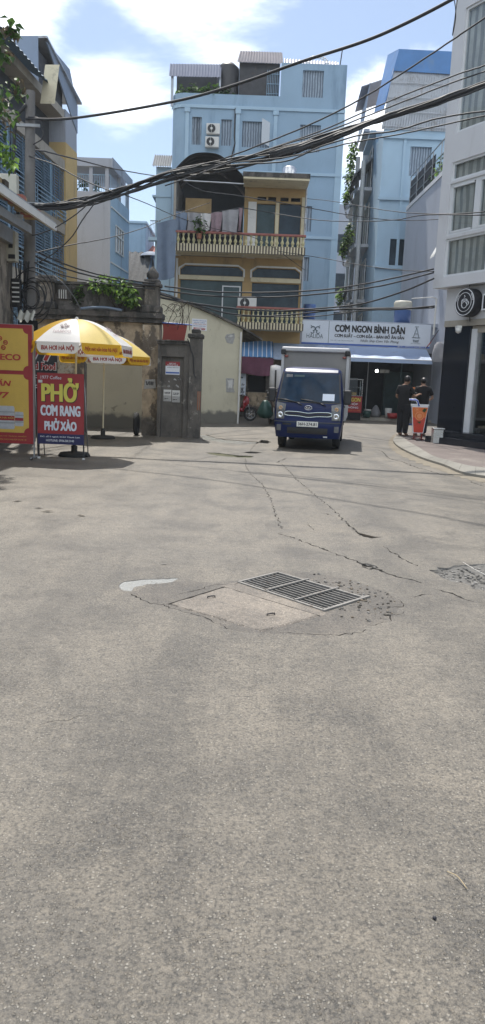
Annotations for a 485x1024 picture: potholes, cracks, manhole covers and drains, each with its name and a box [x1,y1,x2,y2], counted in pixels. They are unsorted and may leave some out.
crack [244,442,474,636]
pothole [430,564,485,590]
drain grate [237,572,370,612]
